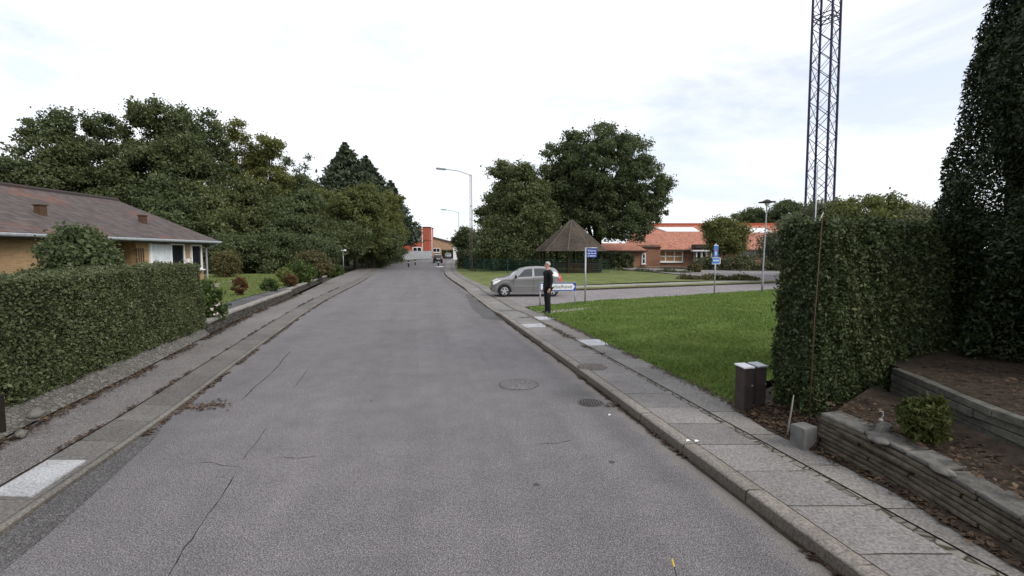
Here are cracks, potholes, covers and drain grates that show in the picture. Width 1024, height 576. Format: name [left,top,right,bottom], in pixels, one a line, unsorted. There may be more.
manhole cover [577,363,607,372]
manhole cover [498,379,539,390]
crack [244,352,306,398]
crack [168,430,265,576]
